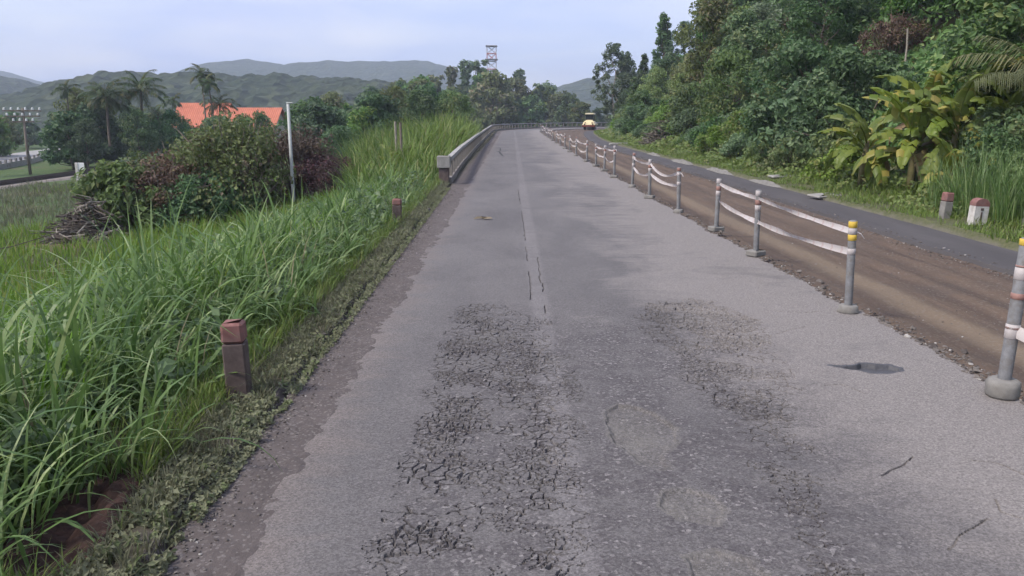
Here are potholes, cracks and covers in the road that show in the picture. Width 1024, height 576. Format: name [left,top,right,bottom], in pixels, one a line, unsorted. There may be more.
pothole [827,362,905,374]
crack [935,496,1024,554]
crack [329,252,923,576]
